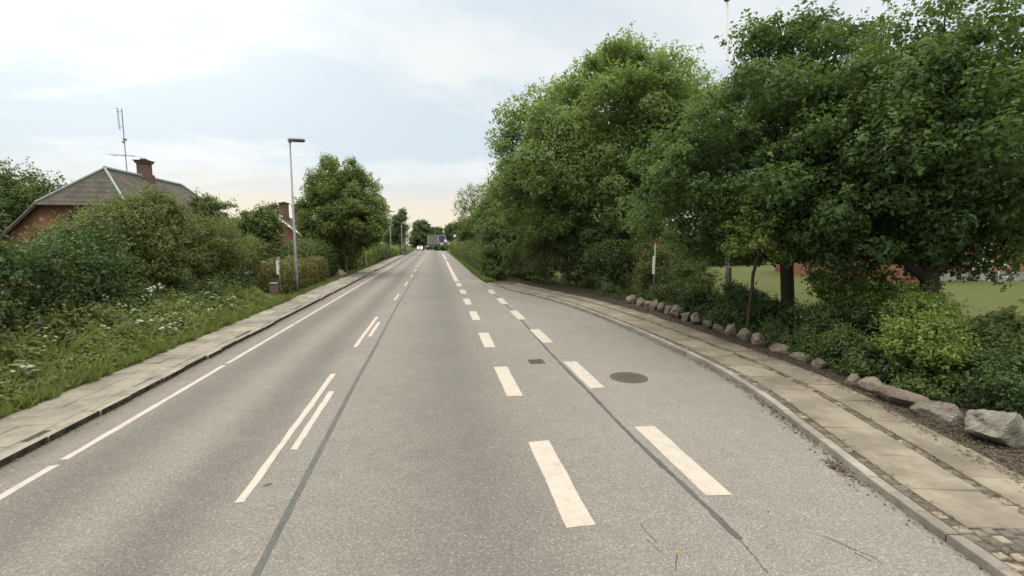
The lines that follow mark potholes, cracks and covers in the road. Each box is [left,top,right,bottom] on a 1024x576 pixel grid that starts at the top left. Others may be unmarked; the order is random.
manhole cover [610,372,648,383]
